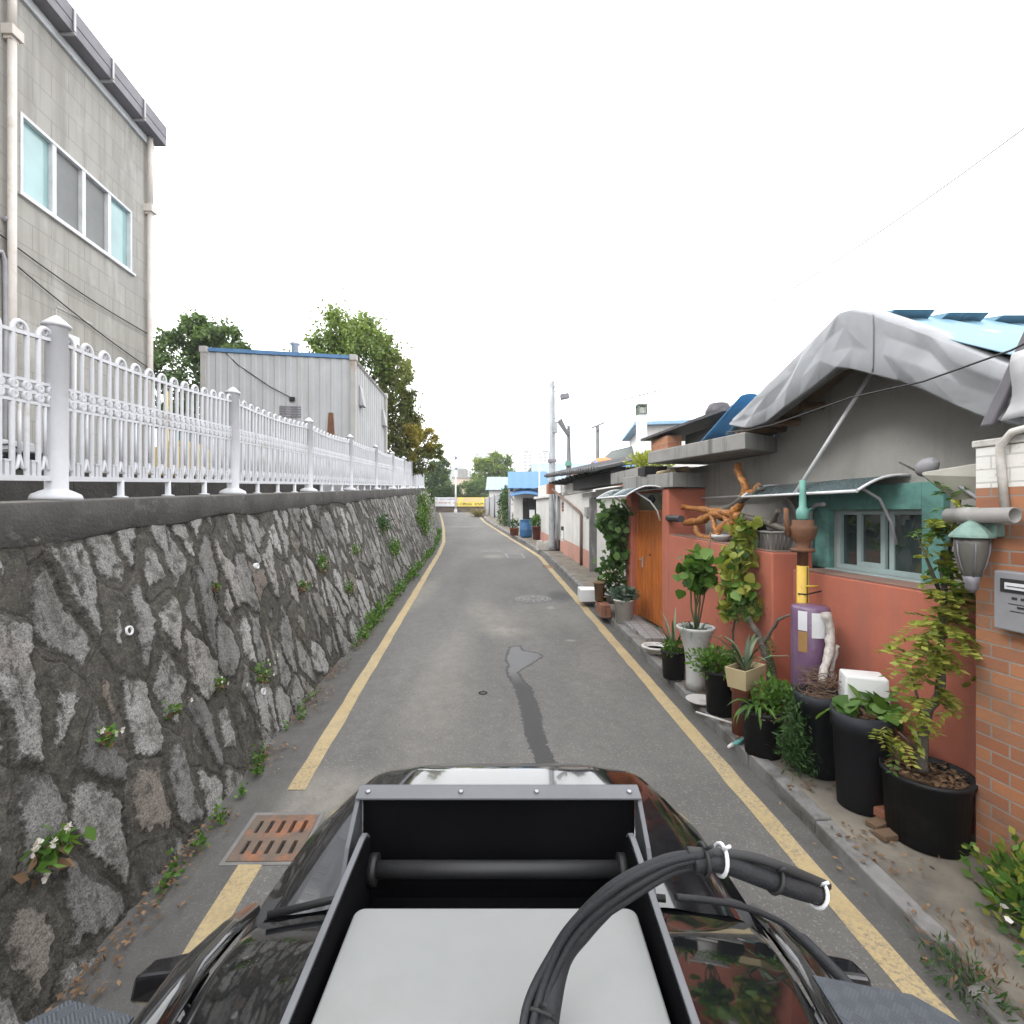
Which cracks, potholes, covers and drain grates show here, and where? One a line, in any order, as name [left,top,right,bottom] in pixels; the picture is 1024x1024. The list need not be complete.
manhole cover [515,595,551,603]
drain grate [218,812,325,866]
